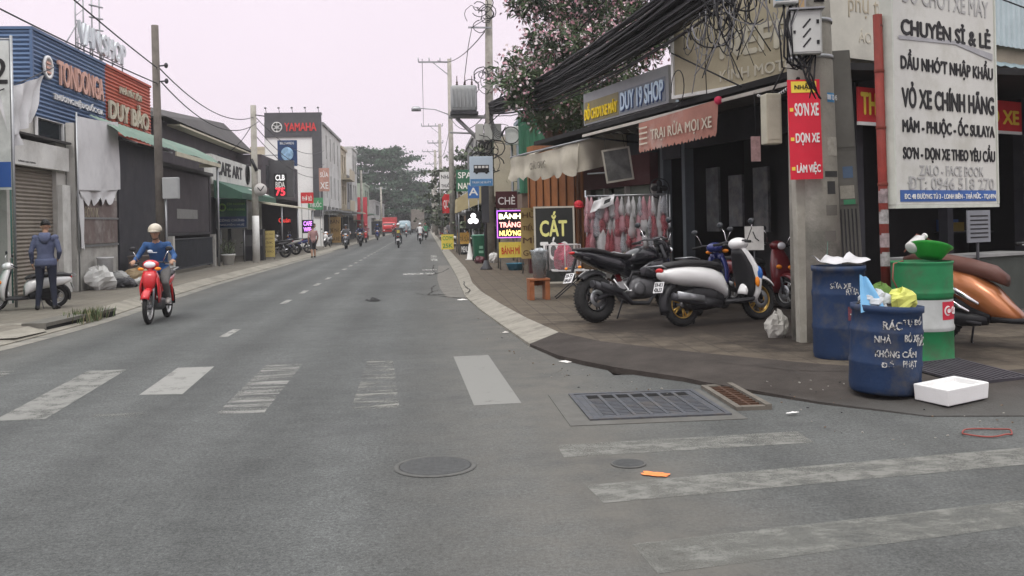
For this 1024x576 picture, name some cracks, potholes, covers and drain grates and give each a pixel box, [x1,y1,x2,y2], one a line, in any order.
drain grate [922,358,1024,383]
drain grate [548,389,748,426]
drain grate [701,382,772,411]
manhole cover [394,455,477,477]
manhole cover [611,459,646,468]
crack [391,265,461,298]
